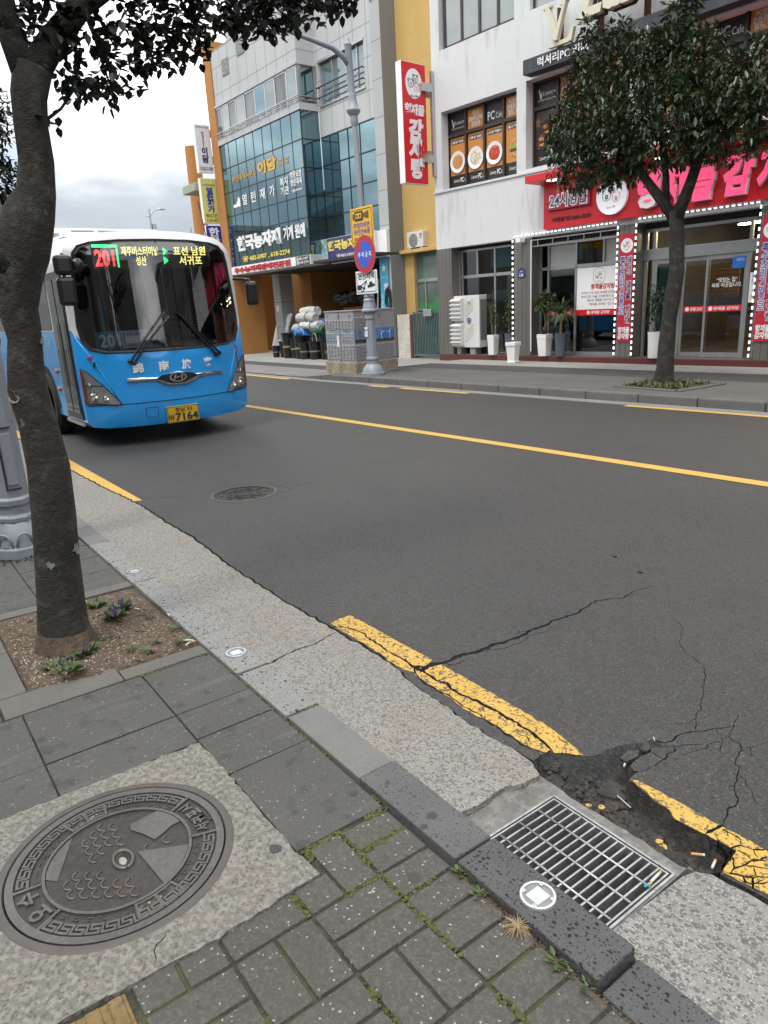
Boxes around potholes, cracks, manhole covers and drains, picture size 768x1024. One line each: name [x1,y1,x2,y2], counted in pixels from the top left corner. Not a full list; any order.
drain grate [490,795,675,930]
crack [644,614,768,892]
manhole cover [211,485,277,502]
pothole [533,740,725,877]
manhole cover [0,783,234,955]
crack [266,586,652,751]
